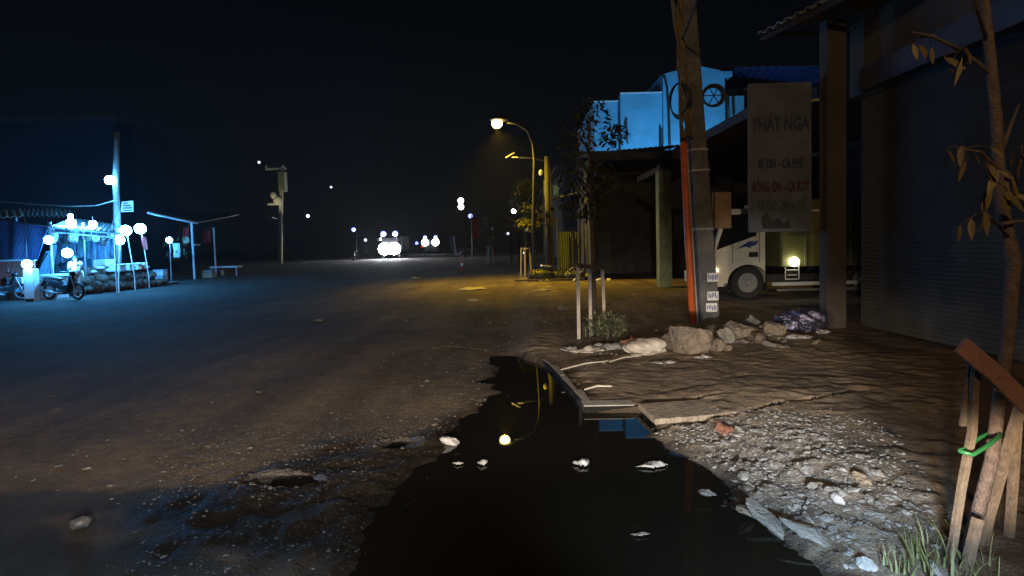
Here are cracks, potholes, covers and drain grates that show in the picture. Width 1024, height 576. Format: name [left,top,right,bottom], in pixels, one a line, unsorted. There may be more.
pothole [372,436,426,449]
crack [754,392,859,410]
pothole [233,468,328,489]
